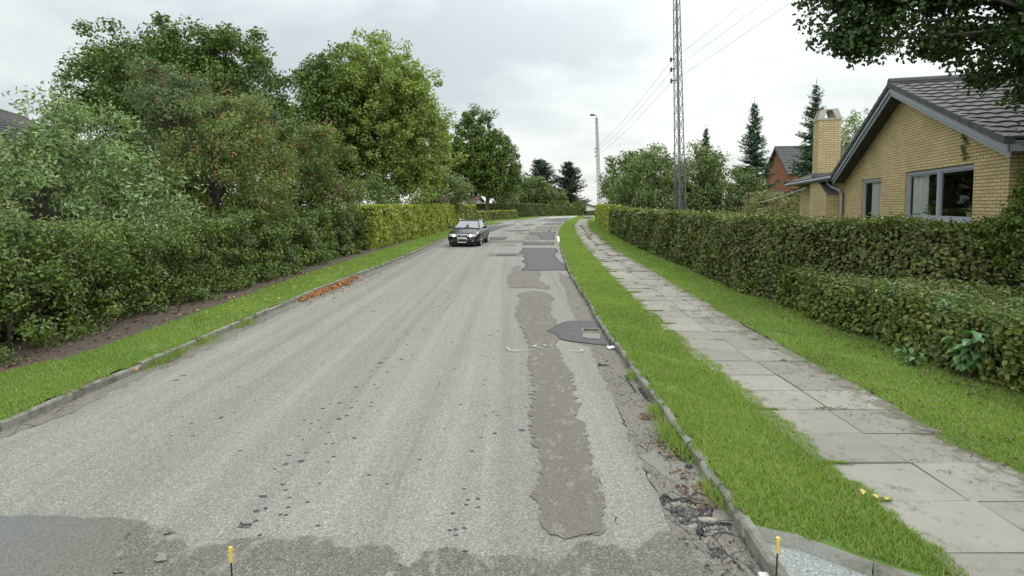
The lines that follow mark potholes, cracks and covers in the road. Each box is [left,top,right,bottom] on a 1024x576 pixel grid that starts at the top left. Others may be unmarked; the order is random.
pothole [659,495,732,534]
